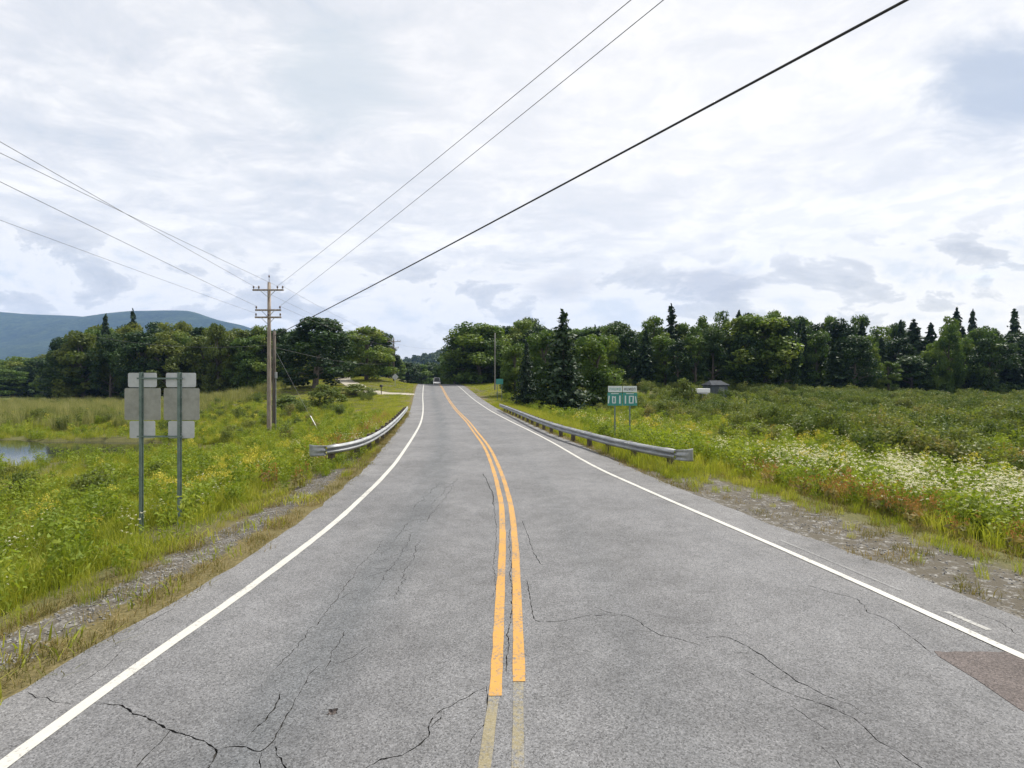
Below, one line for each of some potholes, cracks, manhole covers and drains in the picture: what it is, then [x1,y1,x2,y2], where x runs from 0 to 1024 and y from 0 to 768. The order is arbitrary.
crack [483,475,698,672]
crack [0,479,458,768]
crack [705,636,922,768]
crack [366,687,488,768]
crack [811,586,930,652]
